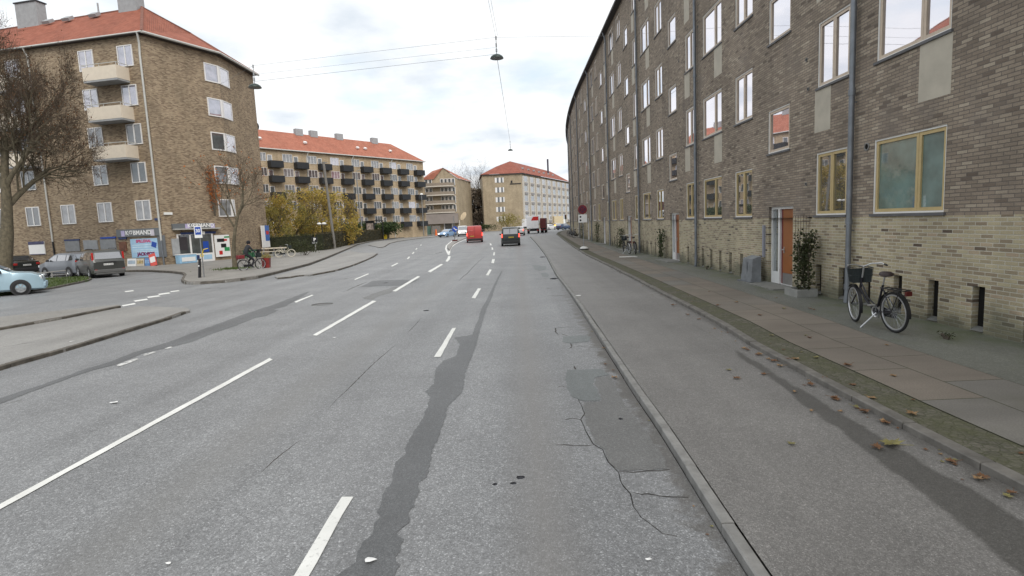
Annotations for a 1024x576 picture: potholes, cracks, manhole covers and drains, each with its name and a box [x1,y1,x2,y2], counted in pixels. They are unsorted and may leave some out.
crack [560,399,689,537]
